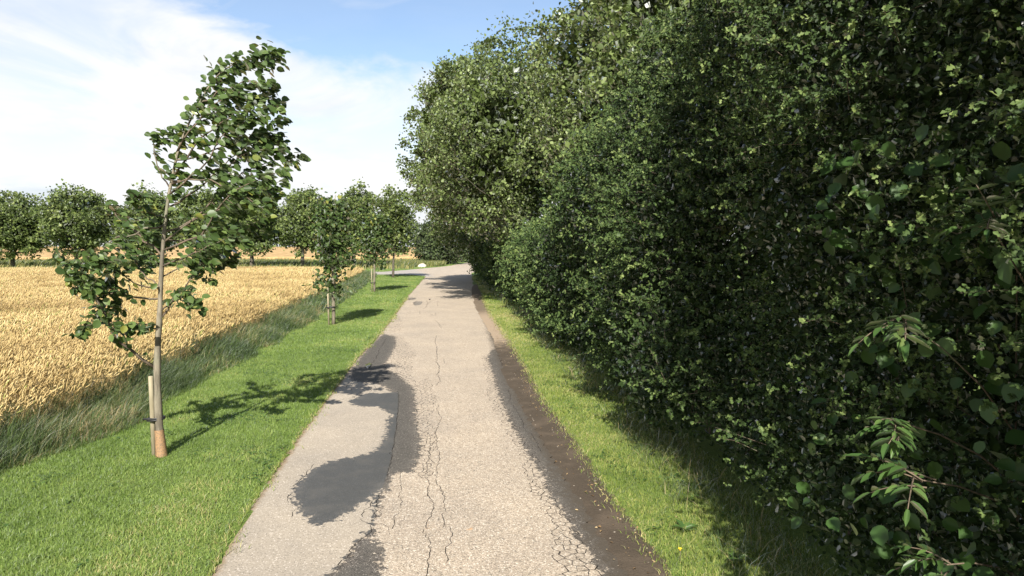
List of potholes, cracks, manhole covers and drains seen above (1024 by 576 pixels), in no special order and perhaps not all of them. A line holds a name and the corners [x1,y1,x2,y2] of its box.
crack [329,301,453,576]
crack [483,358,602,576]
